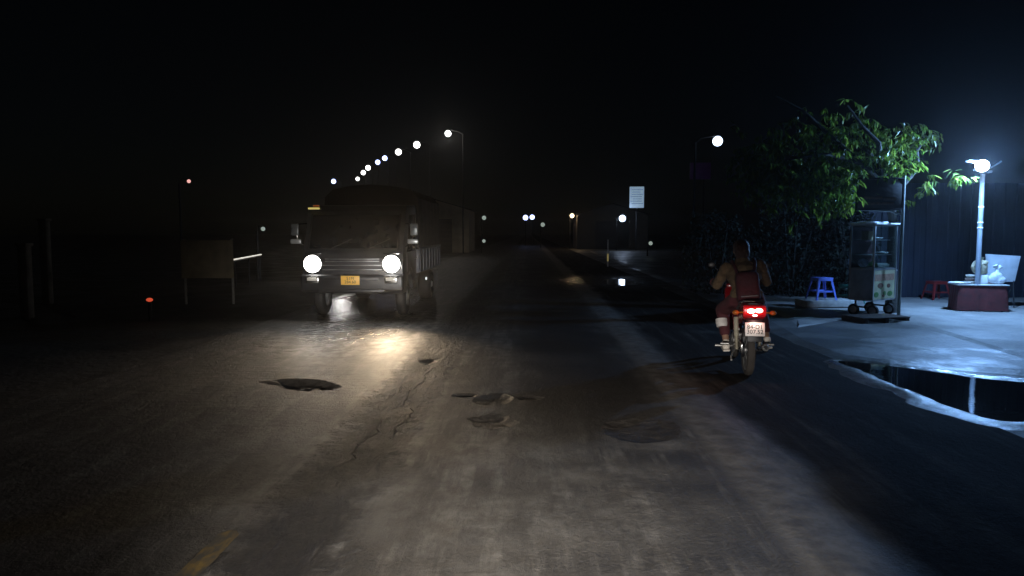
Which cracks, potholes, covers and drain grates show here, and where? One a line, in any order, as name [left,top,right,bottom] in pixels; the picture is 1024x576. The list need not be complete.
pothole [255,378,342,392]
pothole [601,418,681,443]
crack [334,369,432,470]
pothole [467,414,519,429]
pothole [472,393,514,406]
